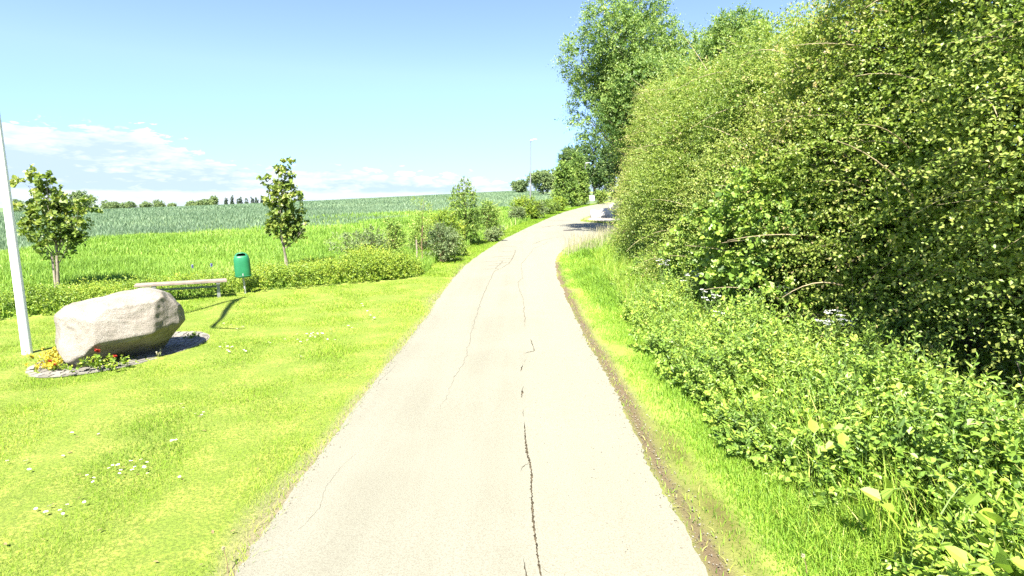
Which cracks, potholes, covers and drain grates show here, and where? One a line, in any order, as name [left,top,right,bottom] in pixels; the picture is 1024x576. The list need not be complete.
crack [521,415,542,576]
